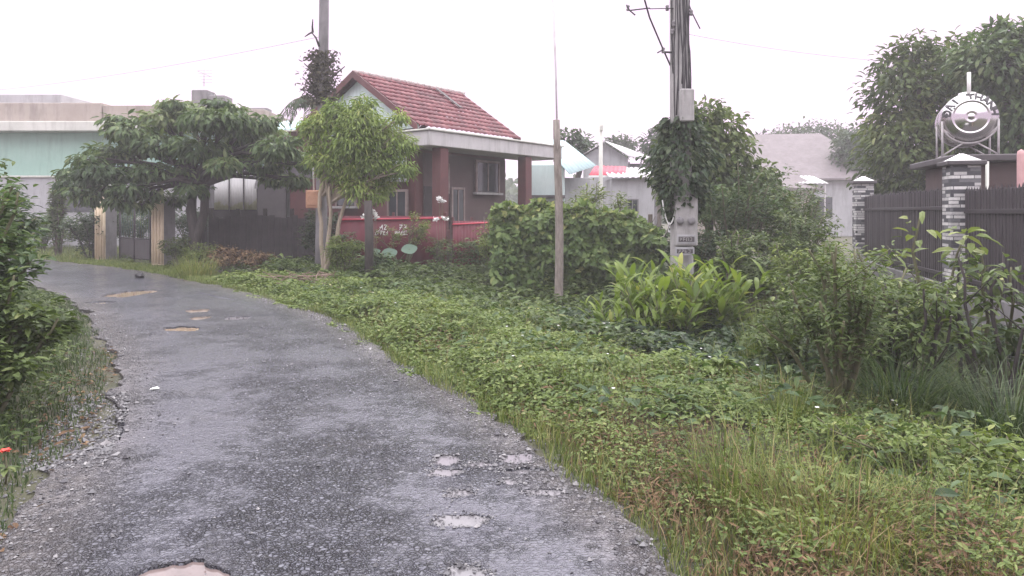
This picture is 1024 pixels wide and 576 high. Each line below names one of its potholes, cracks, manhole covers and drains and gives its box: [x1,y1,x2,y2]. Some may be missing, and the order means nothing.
pothole [445,489,475,497]
pothole [498,453,533,464]
pothole [133,558,231,576]
pothole [432,454,460,466]
pothole [428,469,467,477]
pothole [448,564,486,576]
pothole [102,289,162,297]
pothole [431,514,491,527]
